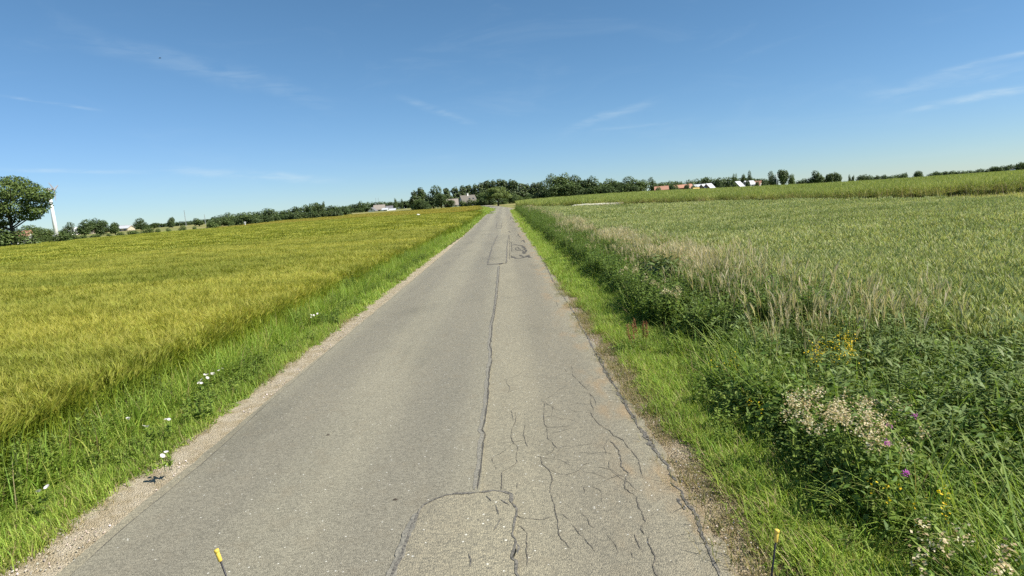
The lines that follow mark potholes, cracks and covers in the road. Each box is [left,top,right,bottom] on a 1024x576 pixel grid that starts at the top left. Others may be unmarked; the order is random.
crack [492,216,720,576]
